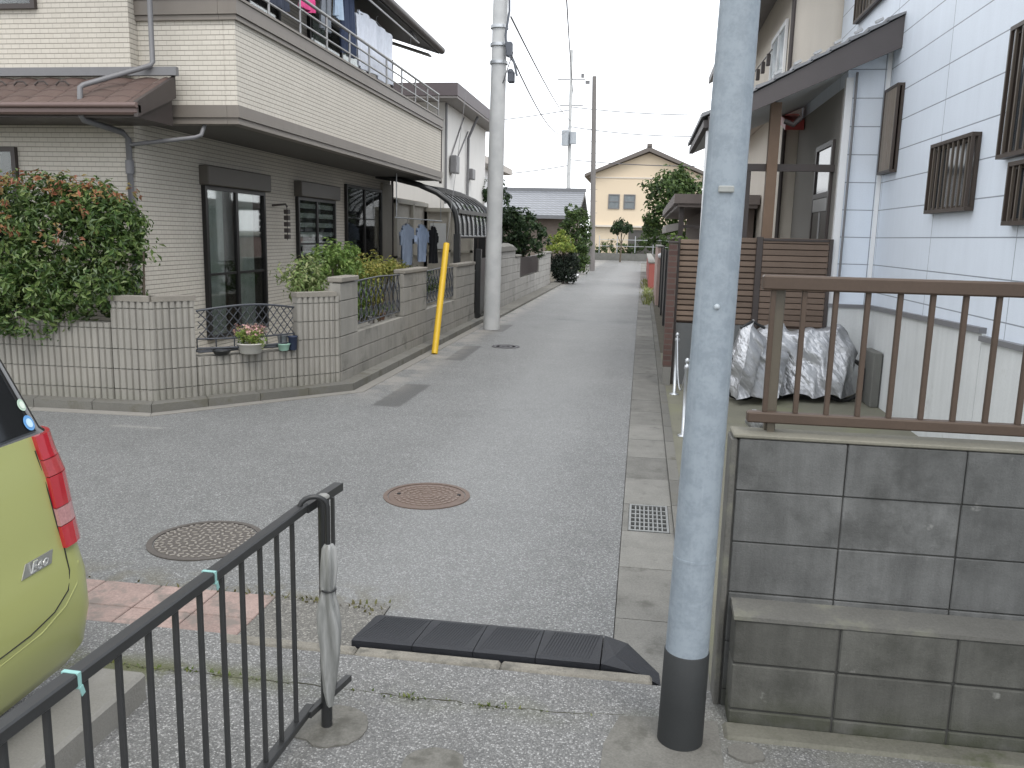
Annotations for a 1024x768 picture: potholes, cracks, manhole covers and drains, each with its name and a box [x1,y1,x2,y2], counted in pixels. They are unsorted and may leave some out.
manhole cover [146,521,261,561]
drain grate [628,504,669,534]
manhole cover [383,482,470,510]
